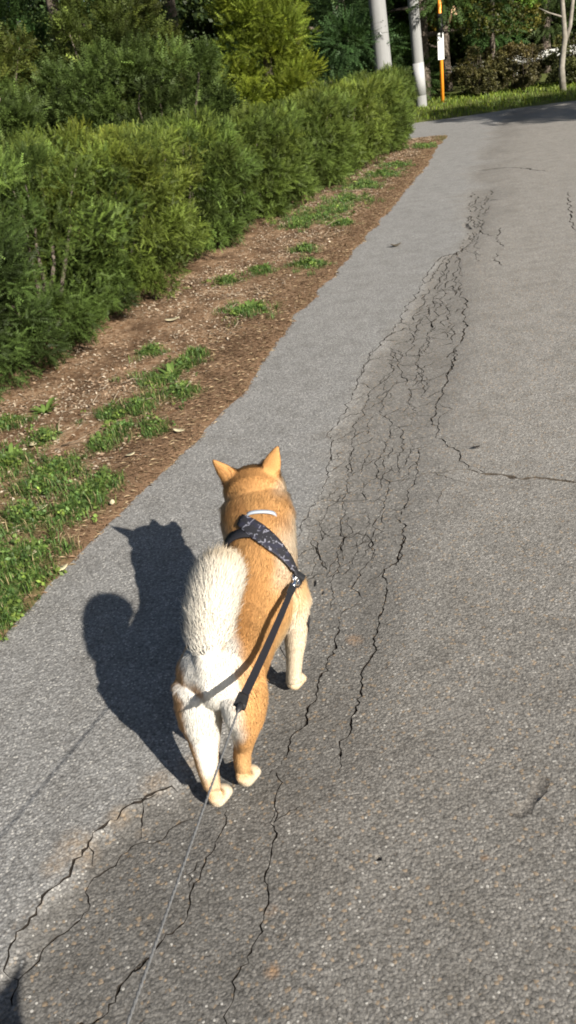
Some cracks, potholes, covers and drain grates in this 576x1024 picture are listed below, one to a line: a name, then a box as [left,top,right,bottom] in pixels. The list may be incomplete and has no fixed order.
crack [3,785,227,1024]
crack [223,190,576,1024]
